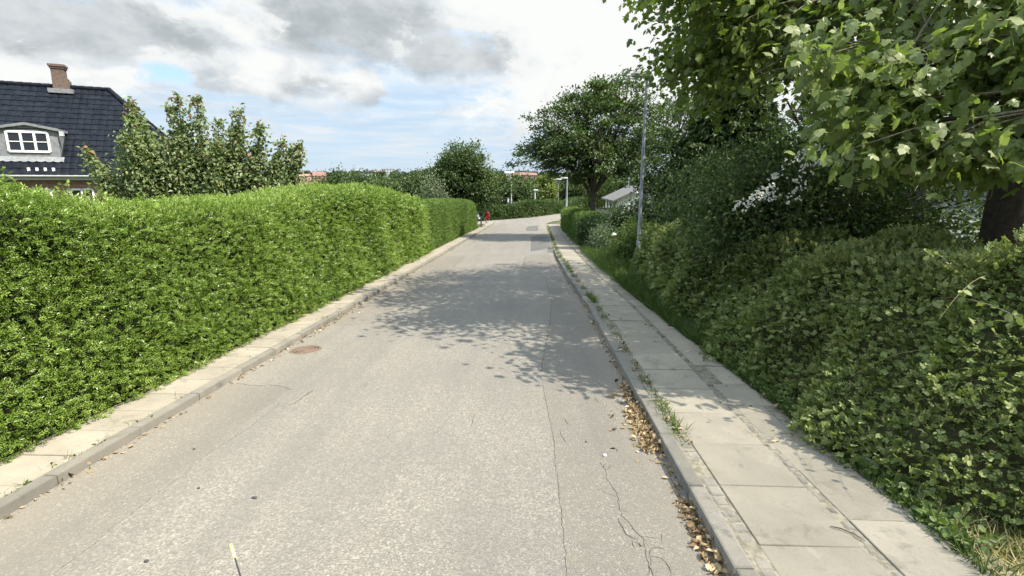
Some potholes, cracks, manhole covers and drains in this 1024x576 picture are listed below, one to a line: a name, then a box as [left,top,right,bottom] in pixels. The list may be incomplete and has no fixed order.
crack [598,463,671,576]
manhole cover [288,345,323,355]
